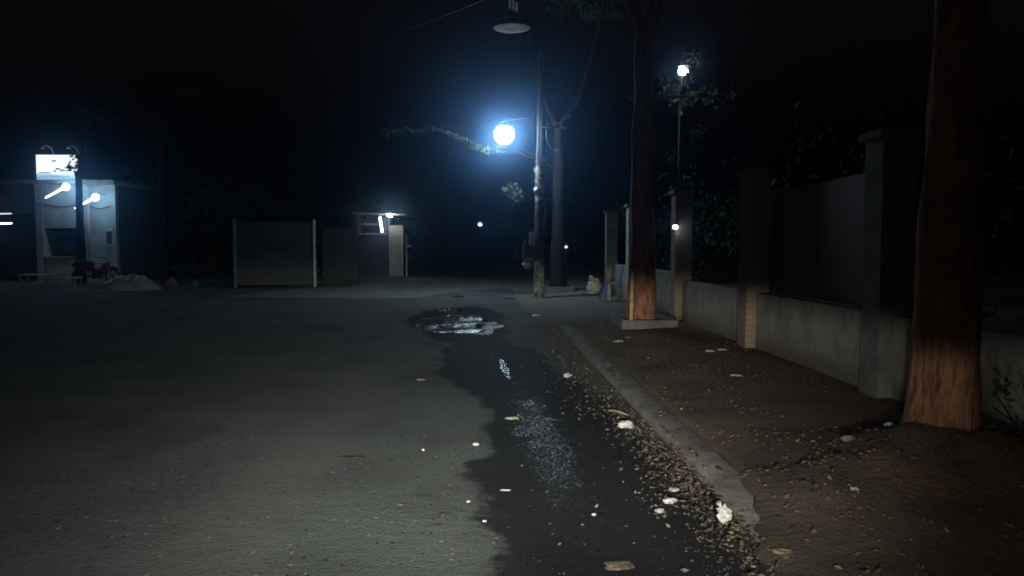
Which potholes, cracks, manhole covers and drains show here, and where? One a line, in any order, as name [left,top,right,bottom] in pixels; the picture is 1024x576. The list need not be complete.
pothole [415,315,505,335]
